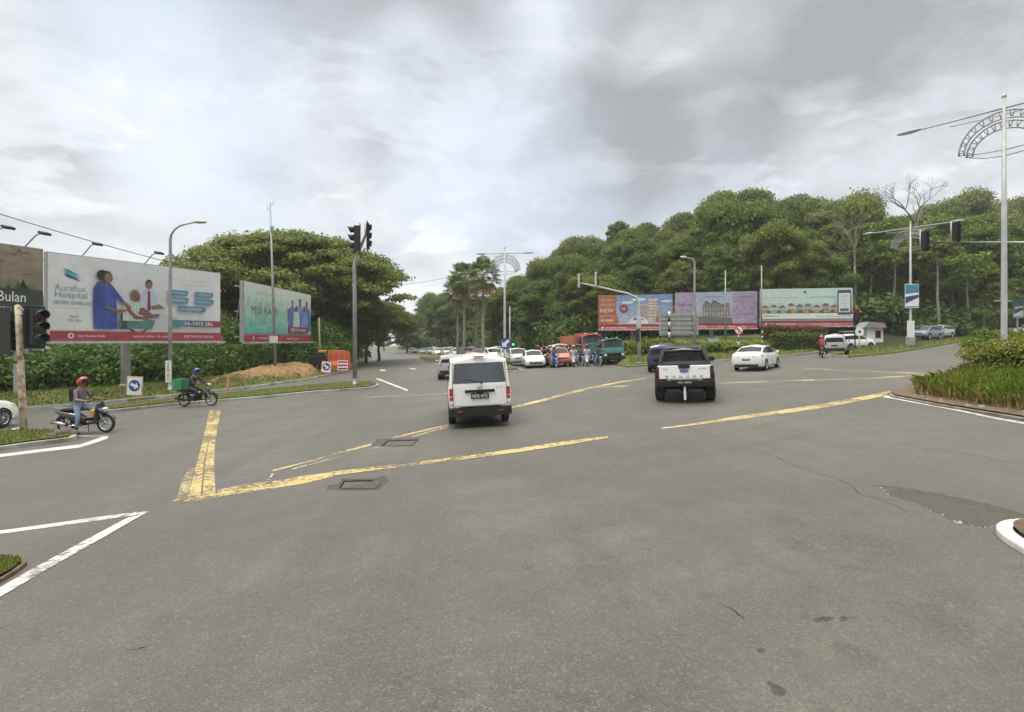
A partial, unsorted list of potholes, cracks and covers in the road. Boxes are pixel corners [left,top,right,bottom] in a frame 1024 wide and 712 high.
pothole [767,681,786,696]
manhole cover [372,438,420,447]
manhole cover [327,476,389,491]
crack [731,448,913,513]
